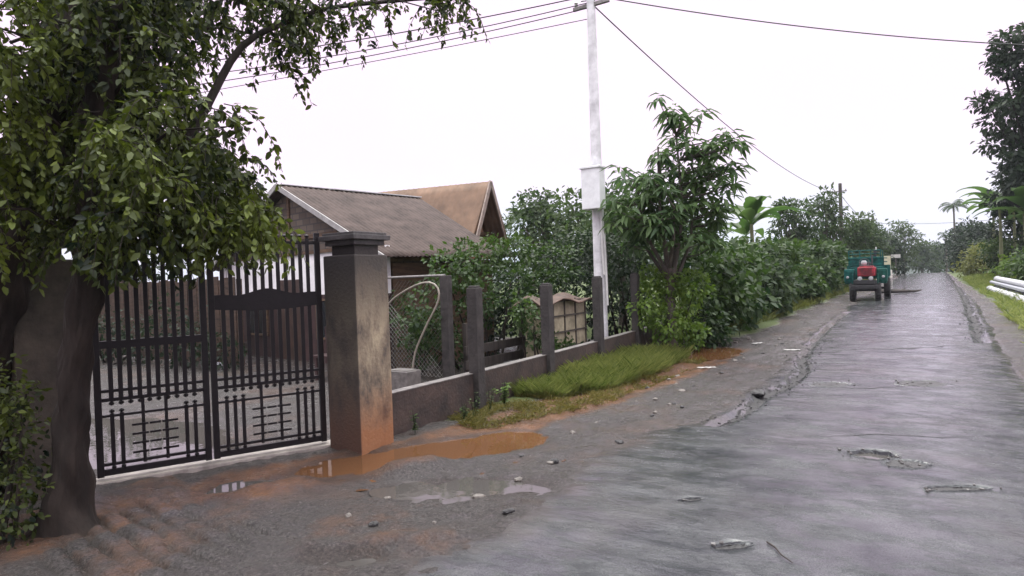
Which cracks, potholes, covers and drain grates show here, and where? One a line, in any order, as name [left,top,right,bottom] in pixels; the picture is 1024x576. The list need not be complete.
pothole [838,448,901,460]
pothole [922,484,1002,492]
pothole [710,541,754,551]
